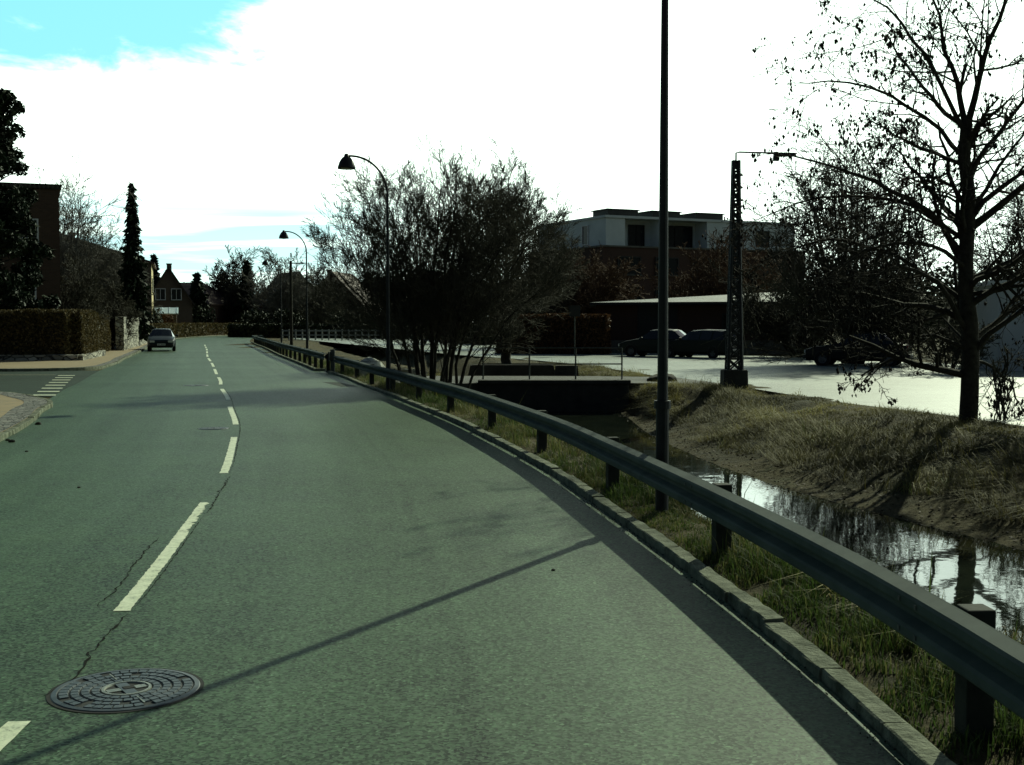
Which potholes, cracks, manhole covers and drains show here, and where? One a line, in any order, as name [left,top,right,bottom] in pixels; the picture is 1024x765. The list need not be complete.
crack [97,539,158,606]
manhole cover [46,668,204,713]
